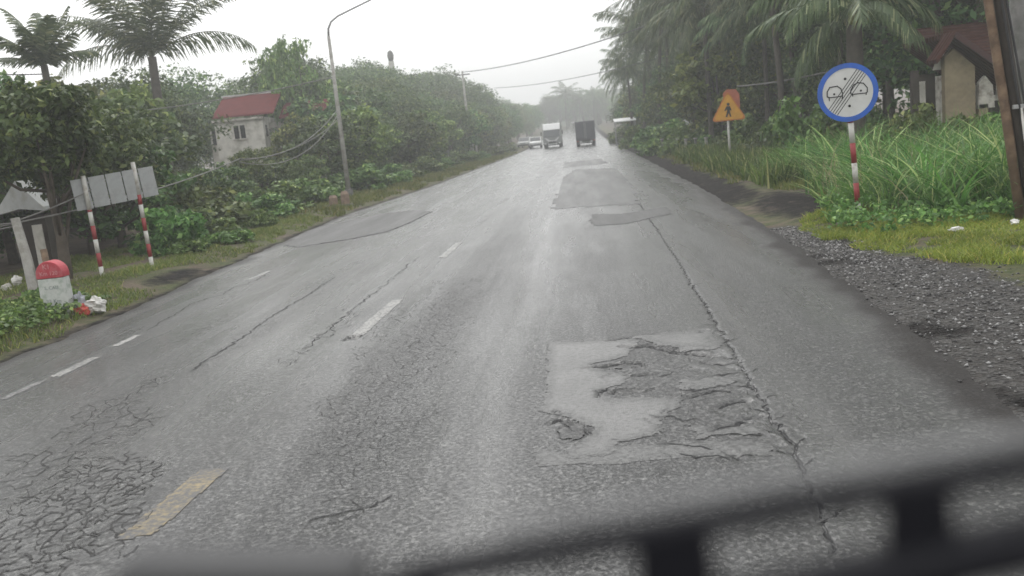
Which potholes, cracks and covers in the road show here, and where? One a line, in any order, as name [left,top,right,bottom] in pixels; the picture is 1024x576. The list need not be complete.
crack [148,275,337,372]
pothole [557,421,586,443]
crack [302,278,488,523]
crack [278,259,416,365]
crack [594,204,837,554]
crack [0,377,168,576]
